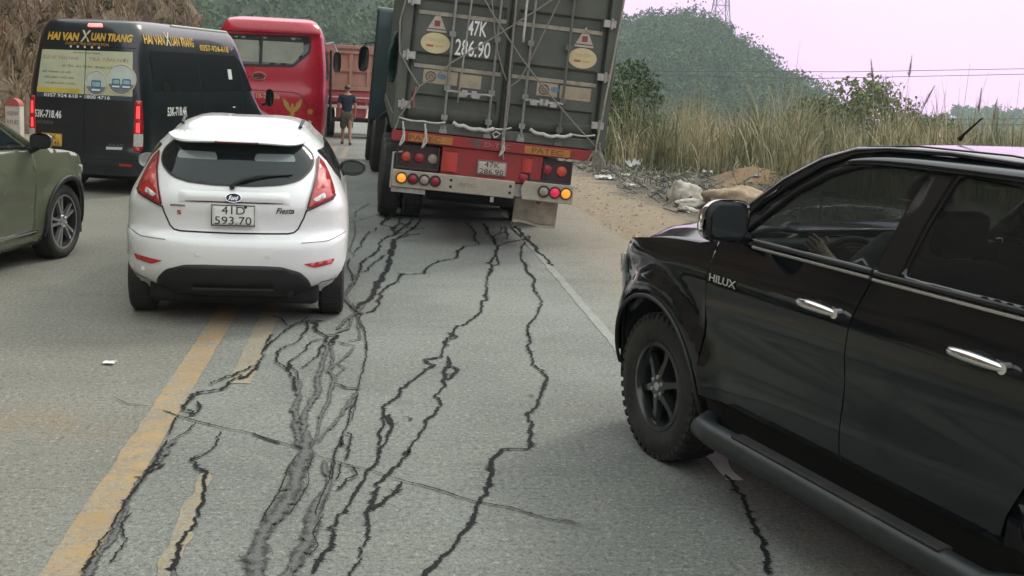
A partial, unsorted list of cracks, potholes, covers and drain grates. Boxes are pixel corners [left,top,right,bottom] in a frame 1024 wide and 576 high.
crack [164,410,583,525]
